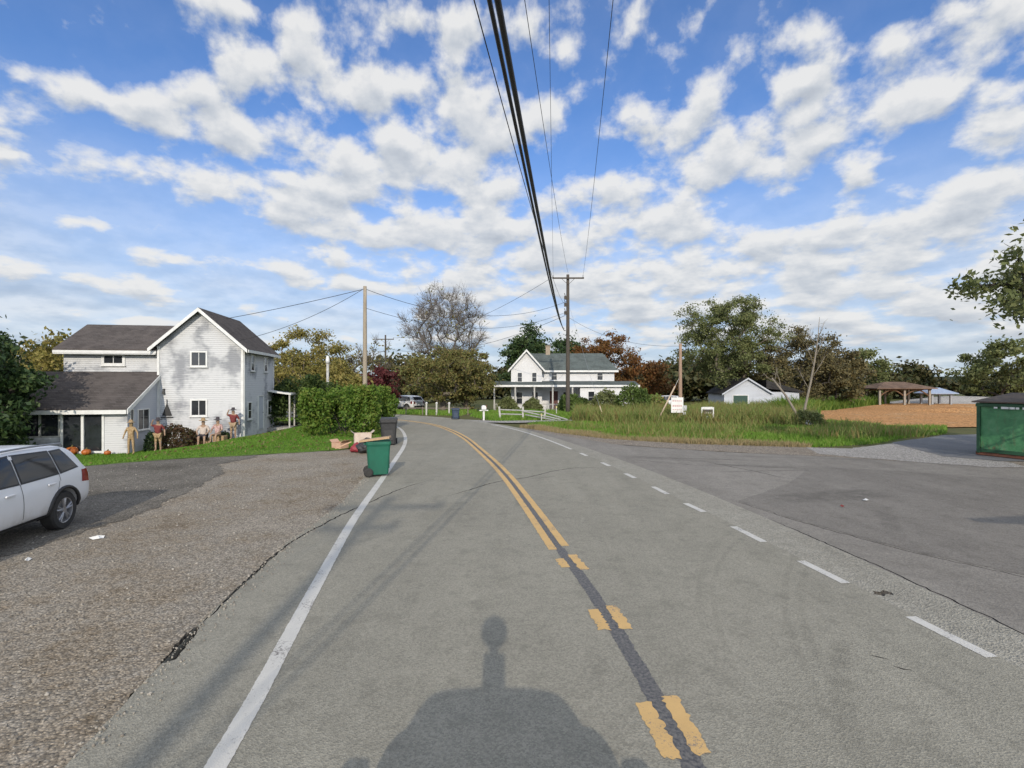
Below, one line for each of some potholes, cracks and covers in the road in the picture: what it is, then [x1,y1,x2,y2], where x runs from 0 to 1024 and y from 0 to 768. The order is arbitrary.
crack [200,479,433,626]
pothole [160,626,199,664]
